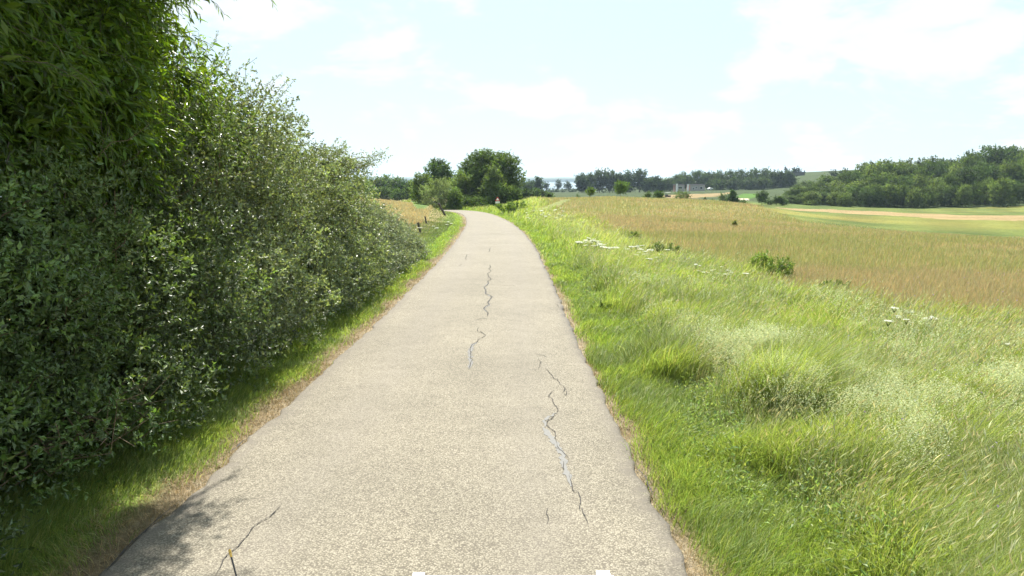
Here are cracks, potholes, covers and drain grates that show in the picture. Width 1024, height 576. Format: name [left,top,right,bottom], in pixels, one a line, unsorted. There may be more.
crack [535,354,589,529]
crack [216,503,282,573]
